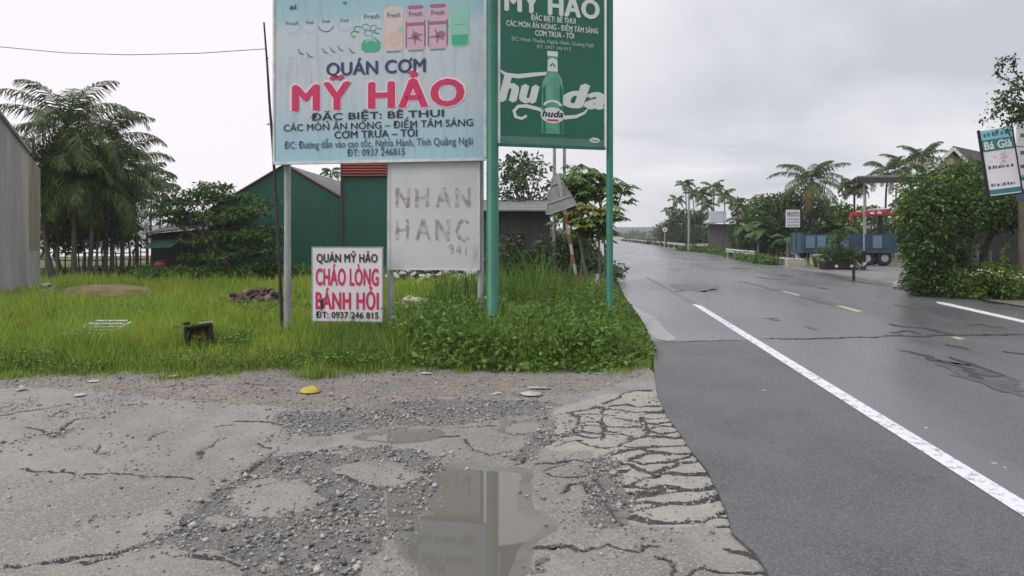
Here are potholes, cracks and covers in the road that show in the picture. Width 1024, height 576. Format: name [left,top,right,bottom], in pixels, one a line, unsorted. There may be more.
crack [533,543,766,576]
crack [21,468,143,476]
crack [534,389,730,528]
pothole [277,397,563,436]
pothole [128,445,446,576]
